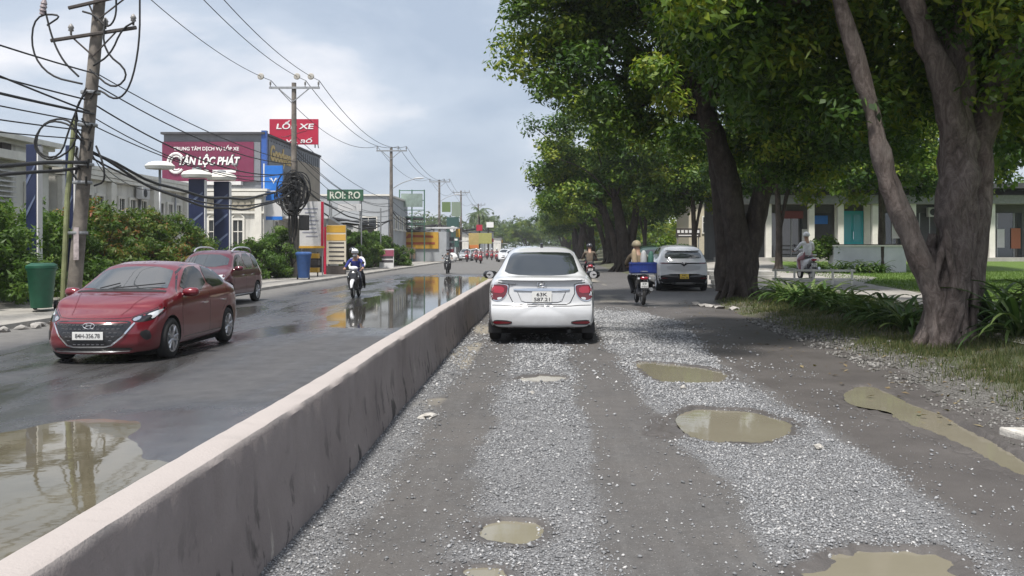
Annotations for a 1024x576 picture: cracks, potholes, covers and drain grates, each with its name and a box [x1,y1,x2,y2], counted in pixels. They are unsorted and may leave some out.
pothole [453,562,518,576]
pothole [830,384,1024,481]
pothole [628,360,735,384]
pothole [644,405,803,446]
pothole [509,374,571,383]
pothole [470,516,554,548]
pothole [783,543,985,576]
